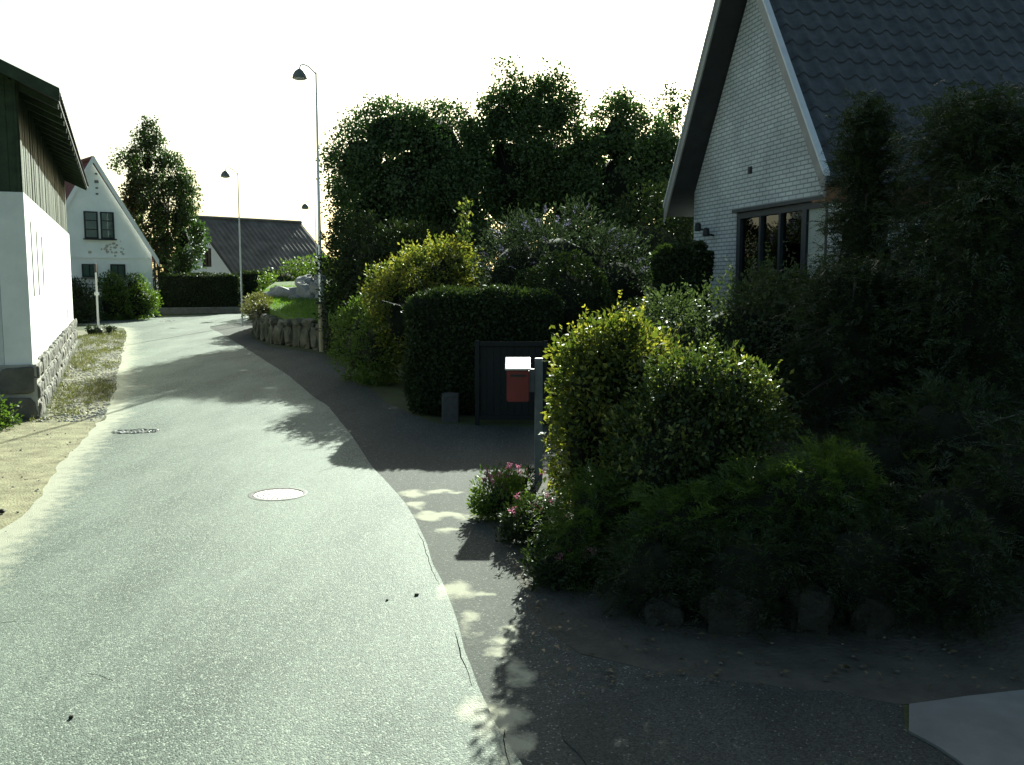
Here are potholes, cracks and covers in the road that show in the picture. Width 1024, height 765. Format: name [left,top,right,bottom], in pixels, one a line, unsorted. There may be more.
manhole cover [247,487,307,501]
